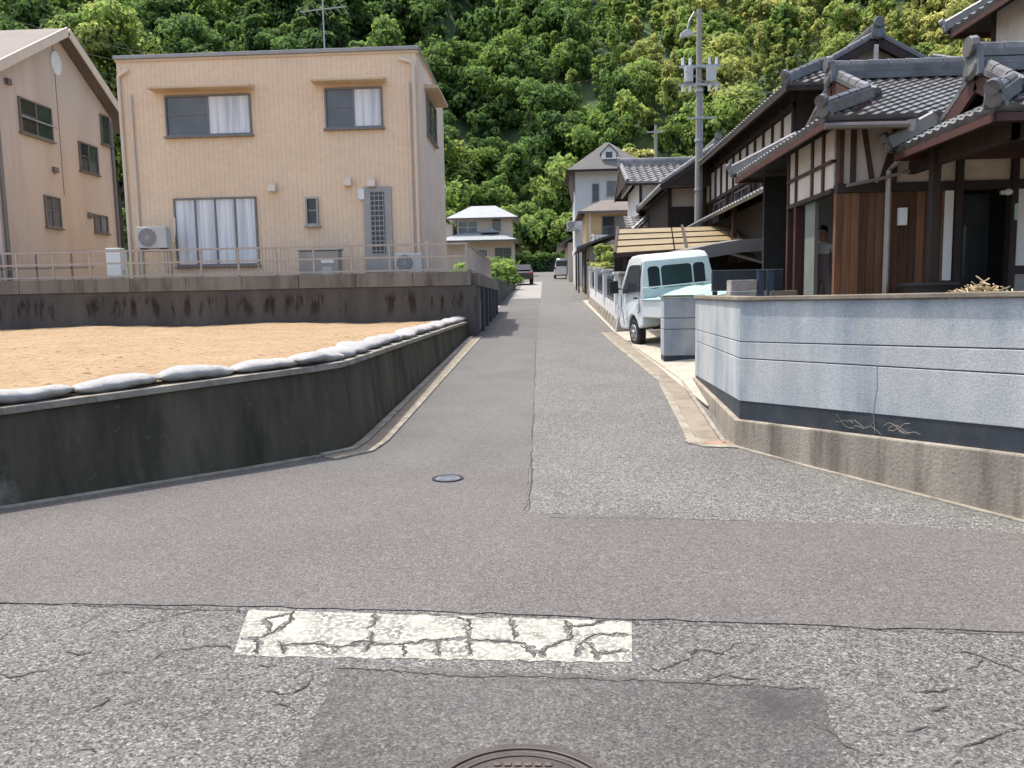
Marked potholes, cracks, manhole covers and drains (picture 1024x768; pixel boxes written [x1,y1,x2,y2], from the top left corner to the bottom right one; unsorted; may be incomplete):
manhole cover [441,744,604,768]
utility cover [432,474,464,483]
crack [0,610,815,758]
